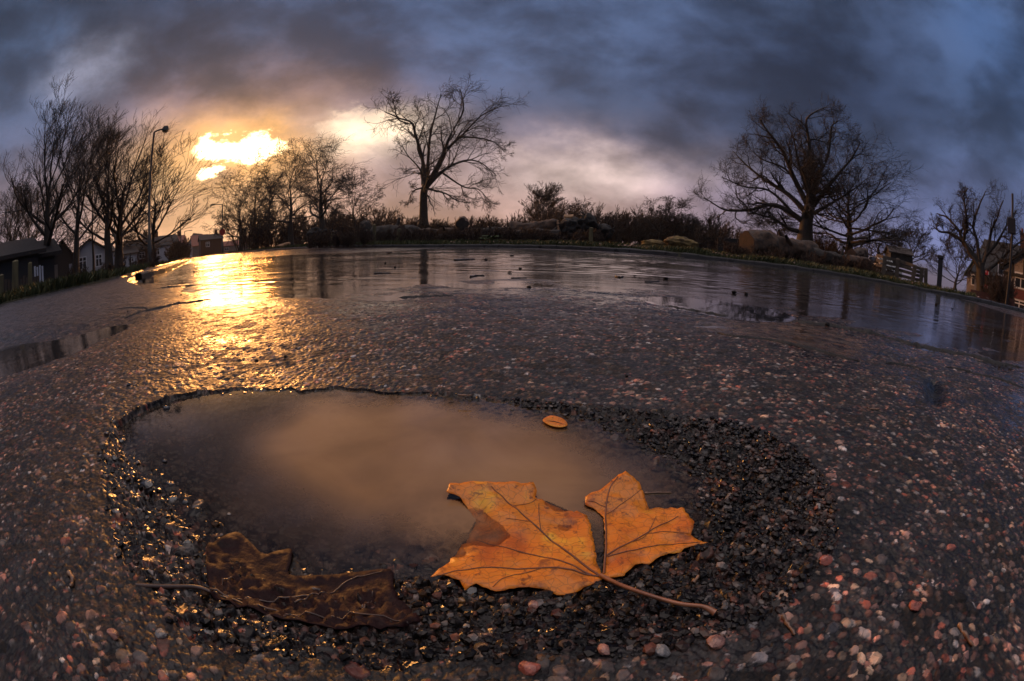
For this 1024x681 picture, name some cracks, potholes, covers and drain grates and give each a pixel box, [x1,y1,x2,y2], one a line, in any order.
pothole [100,386,841,672]
crack [118,285,210,318]
